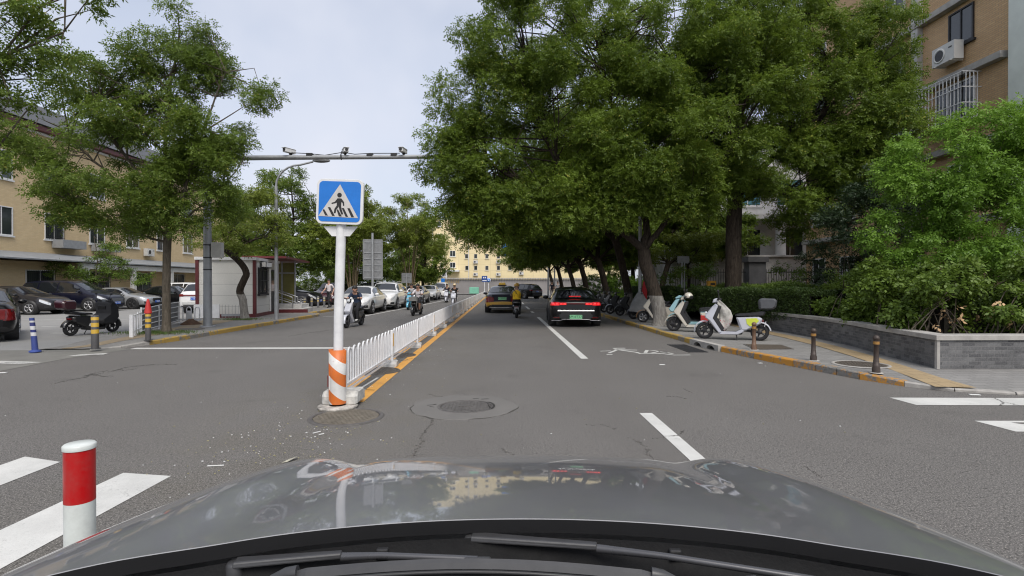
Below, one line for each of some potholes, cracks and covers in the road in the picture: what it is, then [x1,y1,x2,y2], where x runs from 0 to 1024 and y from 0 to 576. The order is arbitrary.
manhole cover [831,360,892,368]
crack [586,424,684,460]
crack [54,364,177,384]
crack [405,419,434,458]
manhole cover [307,408,384,427]
drain grate [667,344,707,353]
